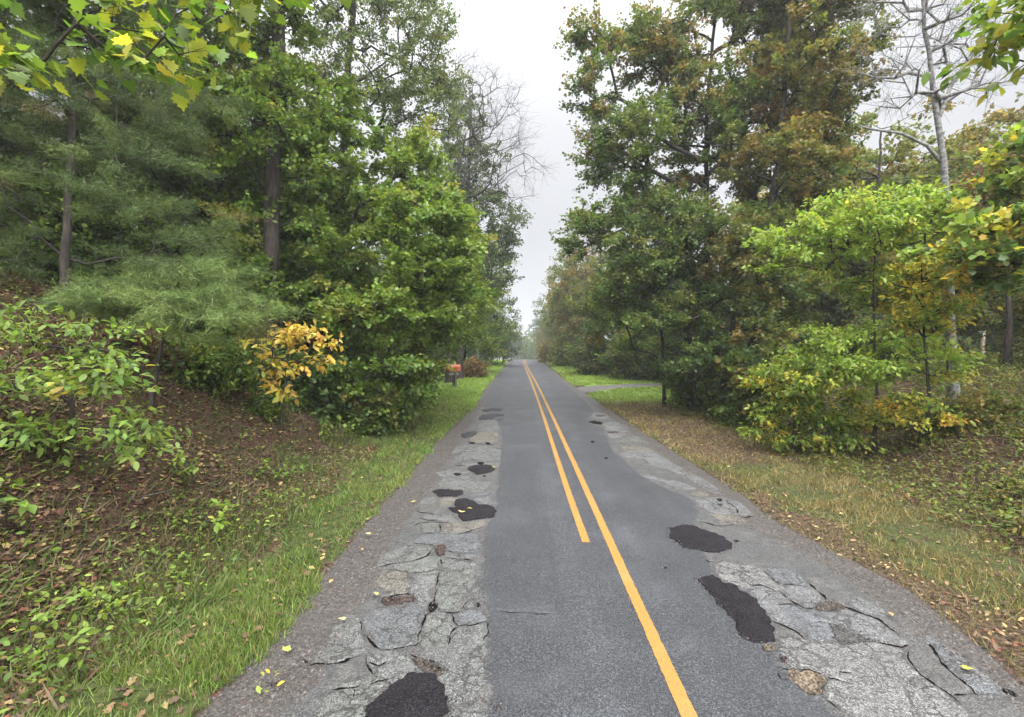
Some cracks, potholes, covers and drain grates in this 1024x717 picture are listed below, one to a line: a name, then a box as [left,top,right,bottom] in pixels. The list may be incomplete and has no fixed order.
crack [750,570,979,704]
crack [303,511,549,696]
pothole [411,657,447,676]
pothole [816,600,845,611]
pothole [787,669,827,695]
pothole [382,595,416,606]
